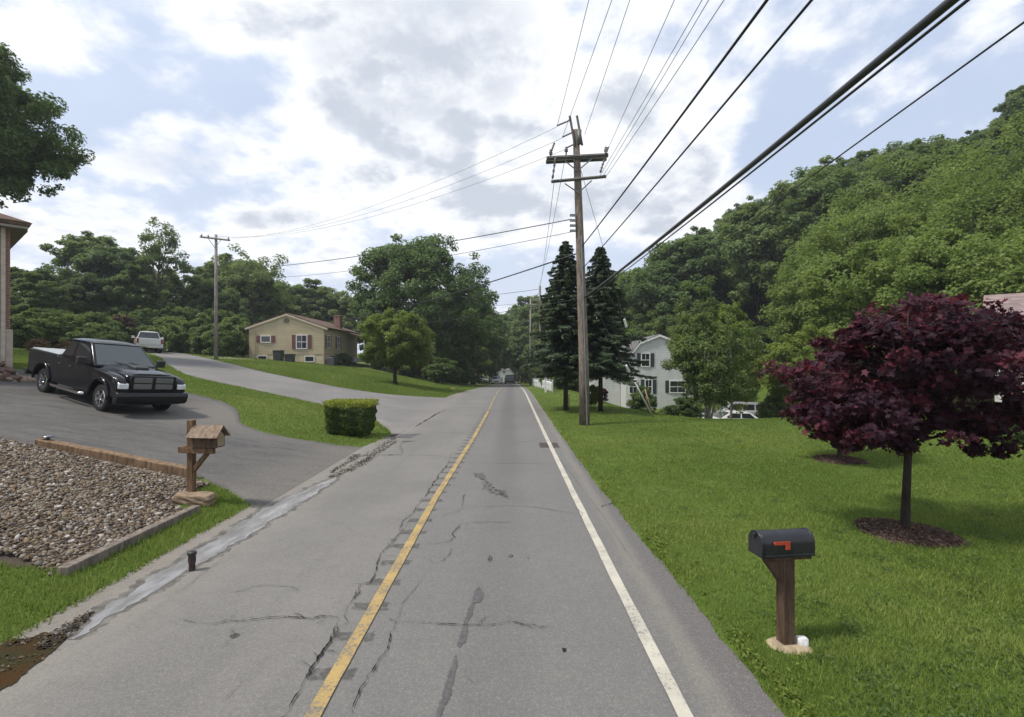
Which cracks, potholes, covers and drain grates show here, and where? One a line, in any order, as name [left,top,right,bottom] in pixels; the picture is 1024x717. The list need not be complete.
crack [215,443,450,717]
crack [351,494,583,711]
